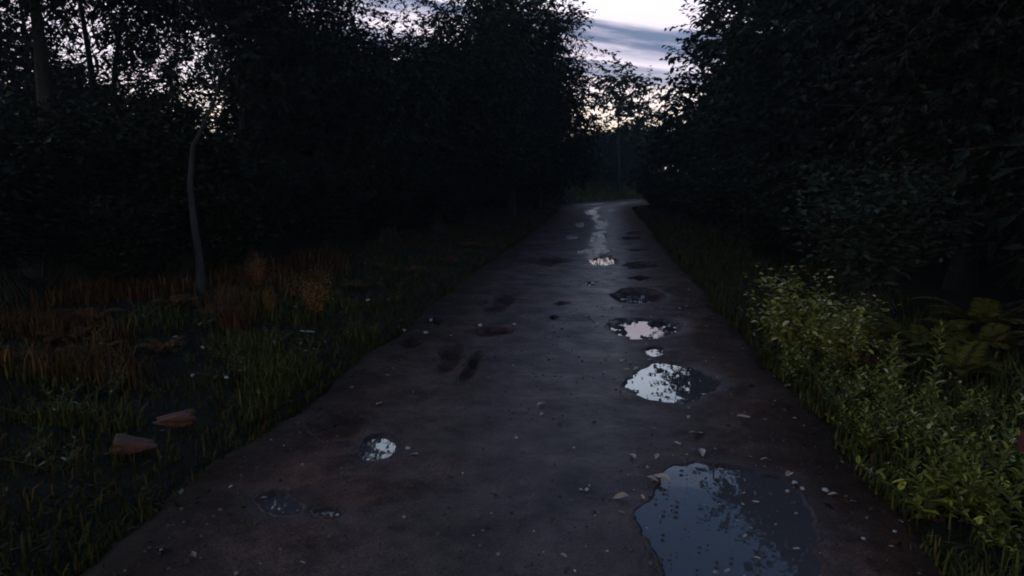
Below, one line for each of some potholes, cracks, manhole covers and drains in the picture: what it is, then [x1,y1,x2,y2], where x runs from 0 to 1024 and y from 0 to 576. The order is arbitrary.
pothole [583,255,620,266]
pothole [357,432,400,462]
pothole [463,327,517,338]
pothole [604,317,686,340]
pothole [629,458,831,576]
pothole [252,489,308,518]
pothole [619,363,727,405]
pothole [310,506,346,519]
pothole [607,287,668,304]
pothole [643,346,666,357]
